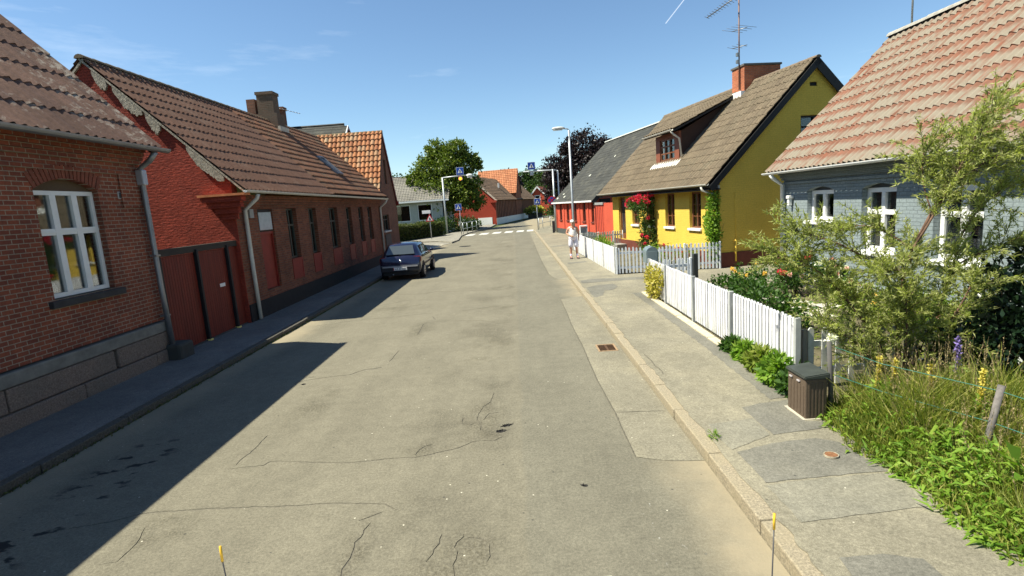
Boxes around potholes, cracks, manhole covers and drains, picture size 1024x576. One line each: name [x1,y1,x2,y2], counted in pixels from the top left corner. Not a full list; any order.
drain grate [595,343,619,352]
manhole cover [823,451,839,459]
crack [293,352,398,384]
crack [69,503,397,576]
crack [232,394,499,469]
crack [426,534,491,576]
